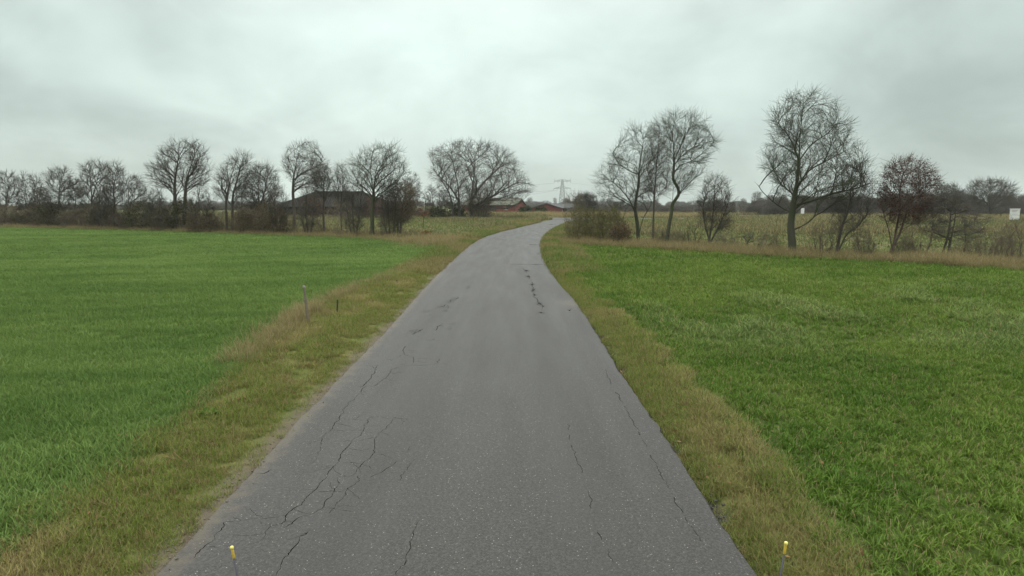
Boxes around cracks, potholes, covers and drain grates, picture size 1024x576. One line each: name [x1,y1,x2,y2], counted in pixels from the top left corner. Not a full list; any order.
crack [194,298,456,575]
crack [606,371,701,541]
